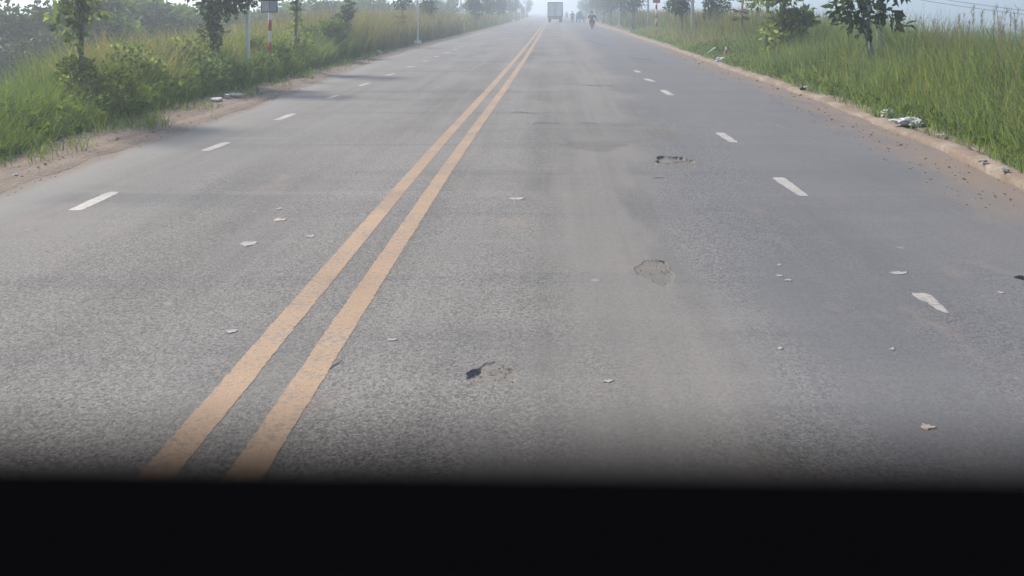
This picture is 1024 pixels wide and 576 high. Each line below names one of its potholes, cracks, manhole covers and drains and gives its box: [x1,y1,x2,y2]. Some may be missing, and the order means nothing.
pothole [634,259,675,288]
pothole [655,156,697,166]
pothole [466,361,518,385]
